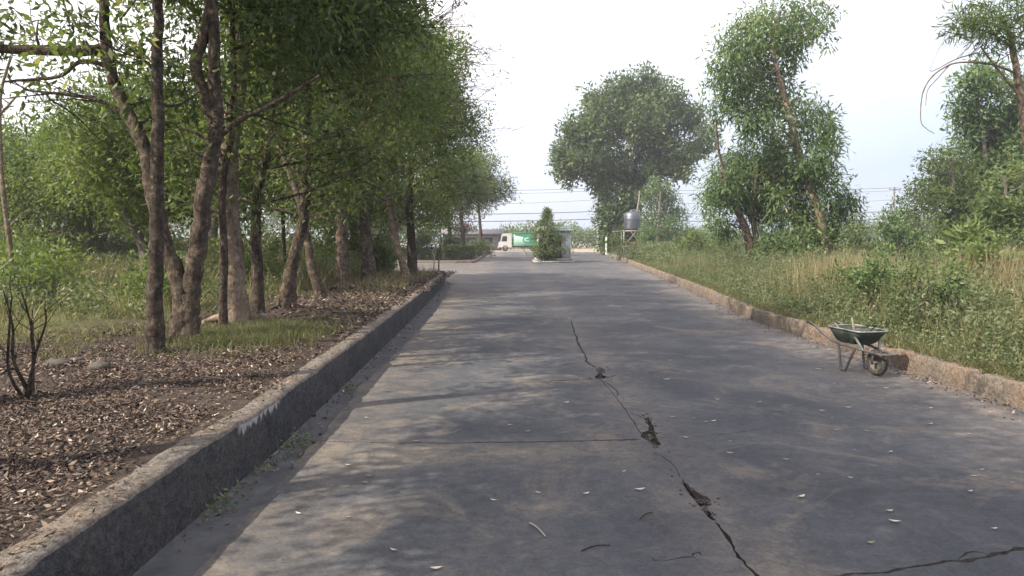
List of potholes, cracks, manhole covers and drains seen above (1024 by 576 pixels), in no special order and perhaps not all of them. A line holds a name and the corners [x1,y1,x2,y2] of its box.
crack [840,547,1024,576]
crack [652,522,759,576]
